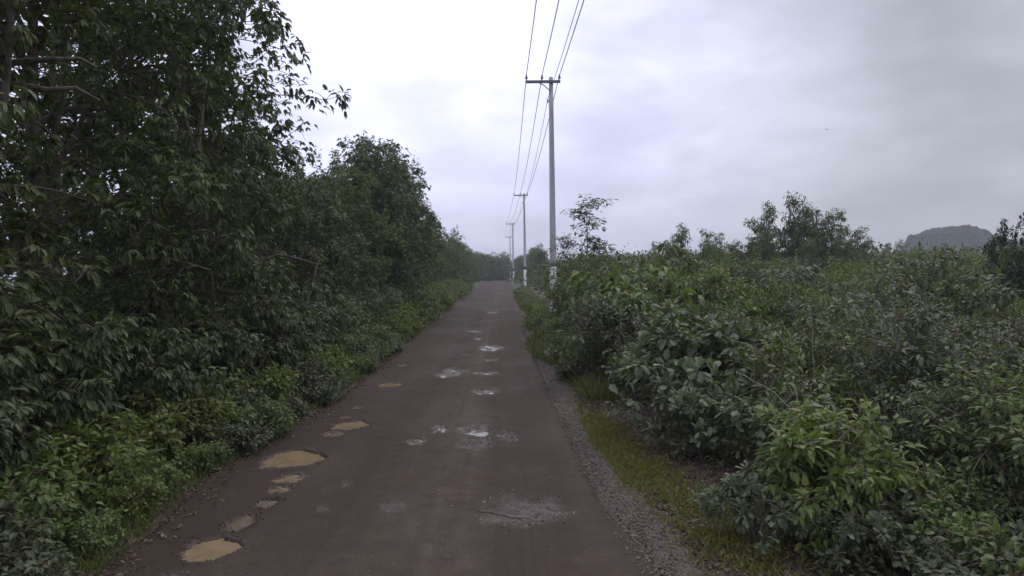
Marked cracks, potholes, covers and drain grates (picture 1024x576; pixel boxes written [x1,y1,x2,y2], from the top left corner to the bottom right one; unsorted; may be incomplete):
pothole [432,367,471,379]
pothole [402,436,428,447]
pothole [218,510,264,534]
pothole [475,344,507,352]
pothole [496,430,518,442]
pothole [252,447,333,471]
pothole [468,387,503,395]
pothole [328,419,374,431]
pothole [266,484,296,494]
pothole [266,472,311,484]
pothole [472,489,578,531]
pothole [249,496,287,510]
